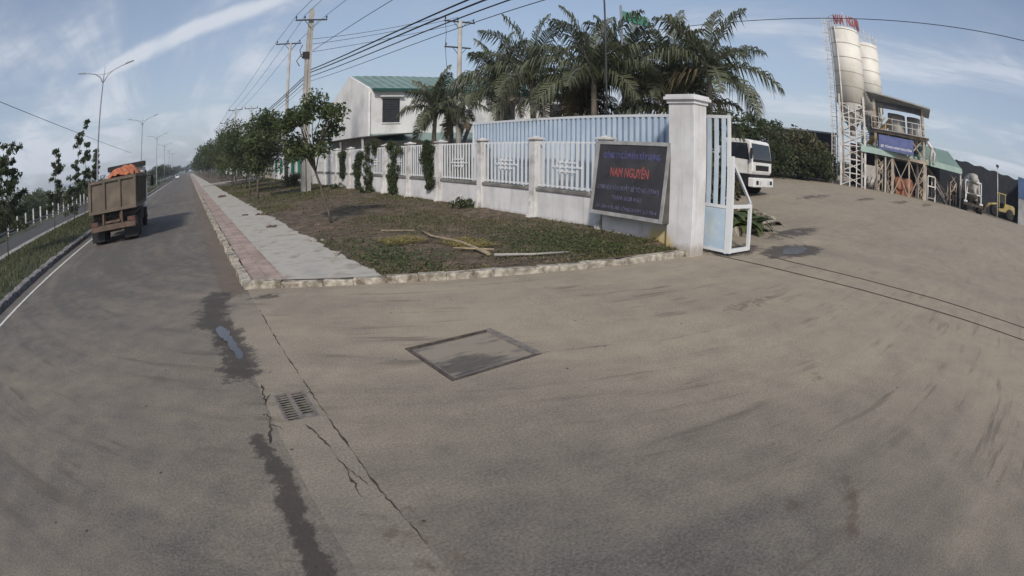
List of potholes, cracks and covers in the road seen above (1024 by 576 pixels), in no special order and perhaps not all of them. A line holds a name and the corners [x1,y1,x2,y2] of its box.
manhole cover [405,328,543,381]
drain grate [273,390,320,422]
crack [305,424,368,497]
crack [252,383,282,443]
